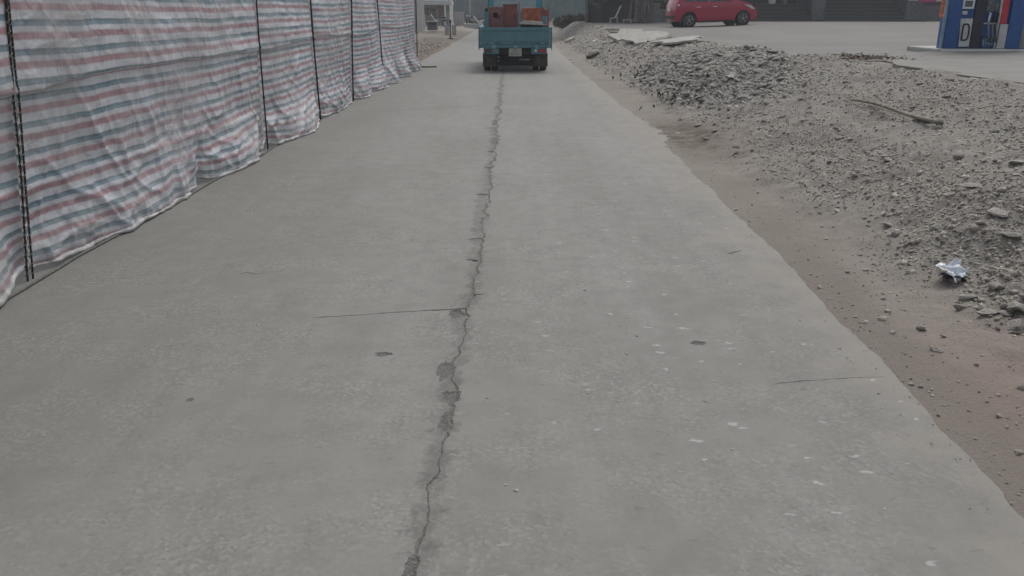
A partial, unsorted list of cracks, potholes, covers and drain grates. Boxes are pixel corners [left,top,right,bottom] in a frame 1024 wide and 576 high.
crack [315,74,504,576]
